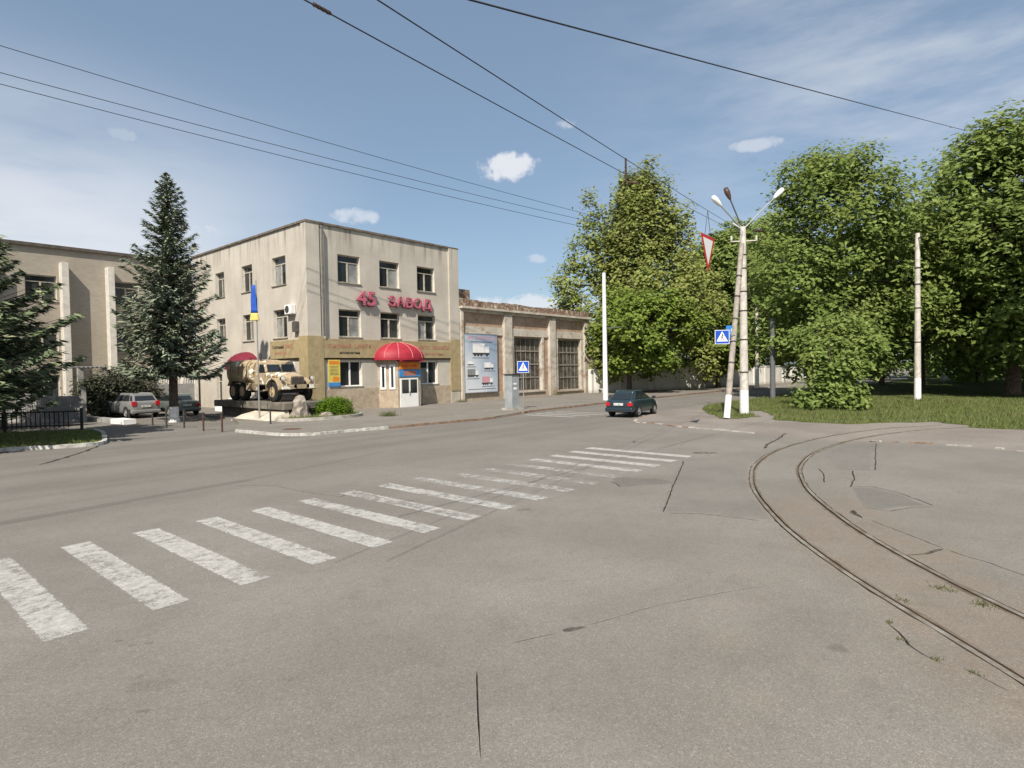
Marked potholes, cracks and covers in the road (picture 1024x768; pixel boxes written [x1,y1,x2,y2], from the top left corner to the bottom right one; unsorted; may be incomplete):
crack [611,461,759,521]
crack [890,625,1010,692]
crack [514,586,763,643]
crack [850,443,1023,575]
